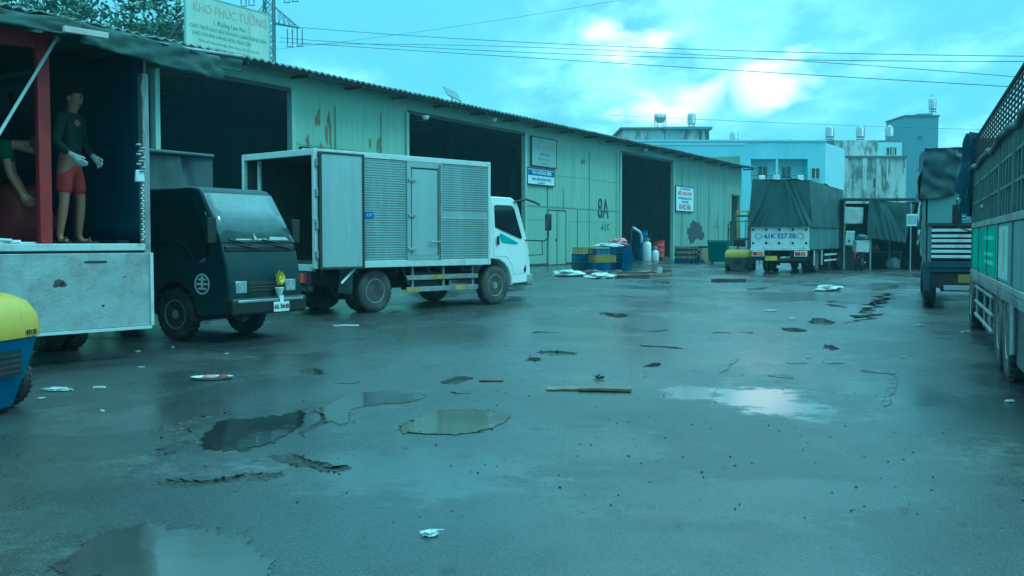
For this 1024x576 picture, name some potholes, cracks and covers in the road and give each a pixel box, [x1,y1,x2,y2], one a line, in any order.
pothole [397,408,511,435]
pothole [266,453,352,473]
pothole [440,376,473,384]
